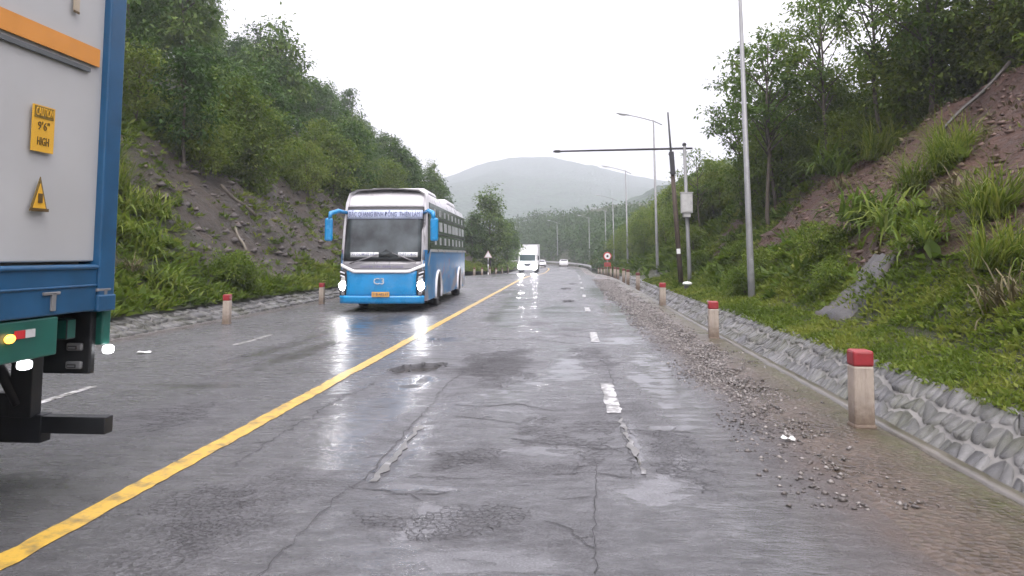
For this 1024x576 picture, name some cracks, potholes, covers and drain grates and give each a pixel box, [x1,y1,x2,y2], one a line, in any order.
pothole [386,362,450,374]
crack [257,329,725,576]
